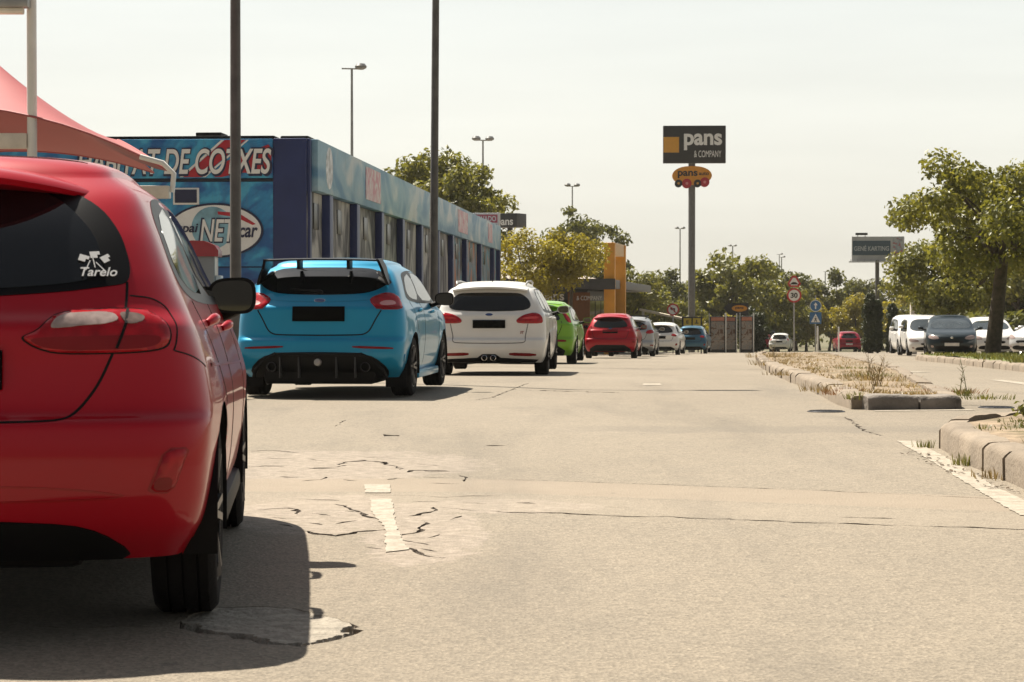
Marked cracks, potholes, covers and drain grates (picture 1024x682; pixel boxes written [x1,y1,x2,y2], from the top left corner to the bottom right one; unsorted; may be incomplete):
crack [471,383,618,401]
crack [248,450,468,484]
pothole [176,606,363,647]
crack [263,495,1024,558]
crack [845,417,881,436]
